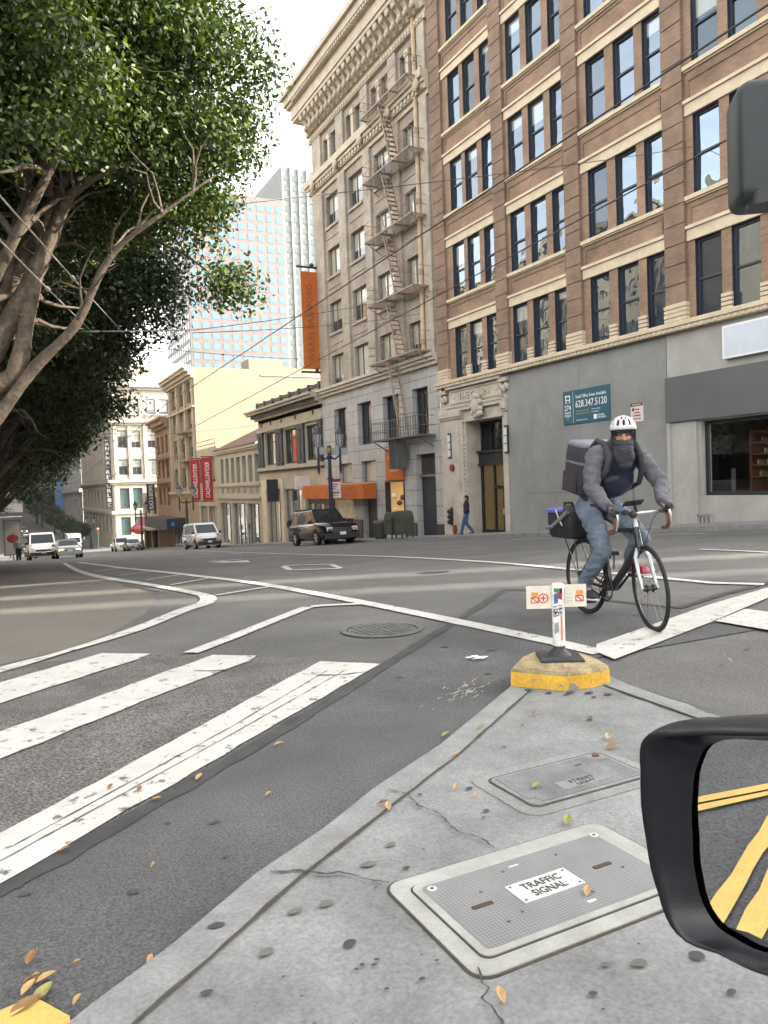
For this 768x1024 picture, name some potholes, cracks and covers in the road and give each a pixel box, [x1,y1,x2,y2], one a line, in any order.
crack [477,967,505,1024]
utility cover [472,748,640,816]
manhole cover [341,621,423,637]
utility cover [387,824,664,980]
crack [270,869,388,882]
crack [390,789,495,848]
